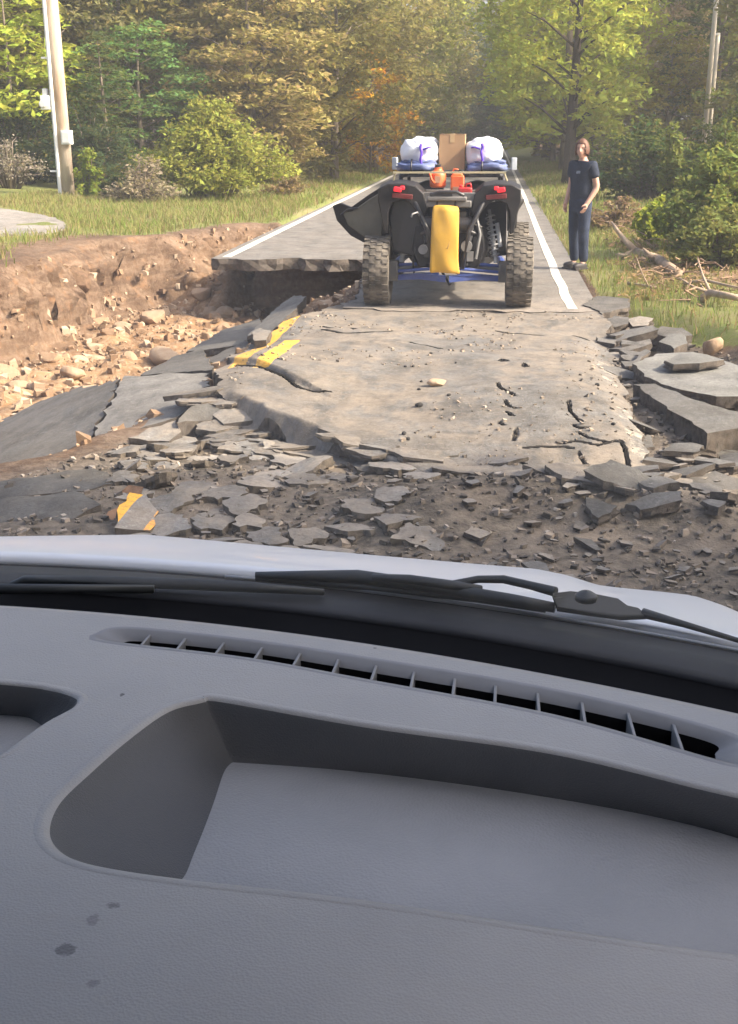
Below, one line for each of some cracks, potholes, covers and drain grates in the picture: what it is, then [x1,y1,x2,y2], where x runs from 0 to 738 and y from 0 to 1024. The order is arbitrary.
crack [234,365,330,393]
crack [496,382,629,466]
crack [495,330,589,341]
